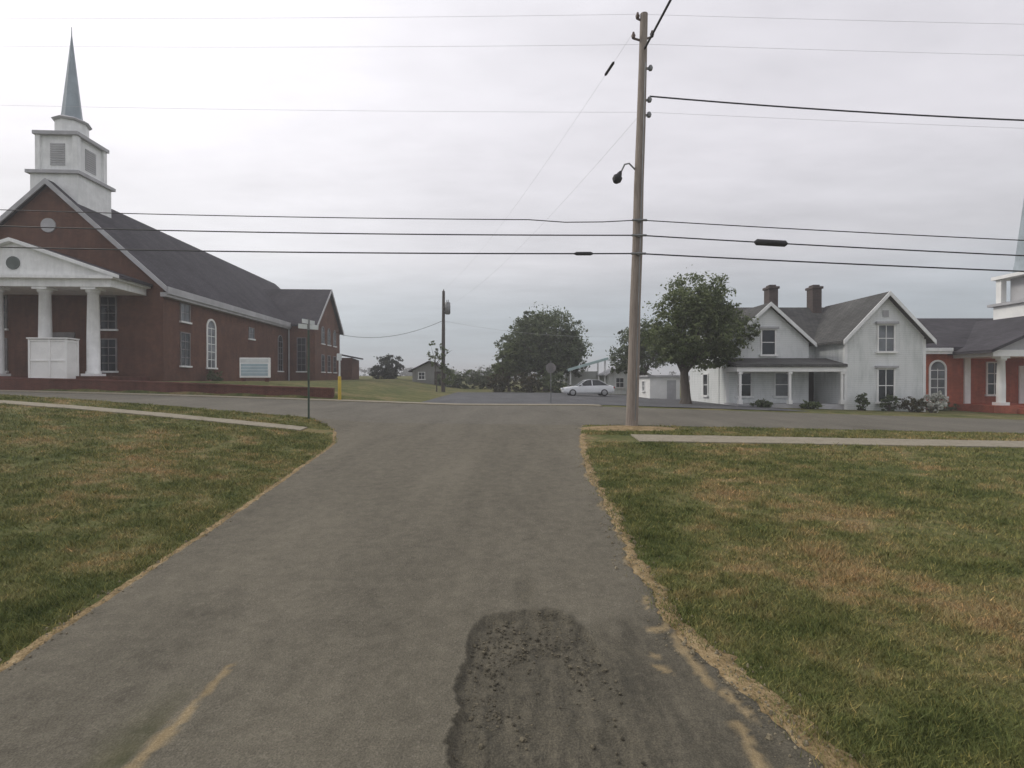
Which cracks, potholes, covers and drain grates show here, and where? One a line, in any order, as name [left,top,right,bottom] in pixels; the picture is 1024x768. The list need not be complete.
pothole [437,605,664,768]
